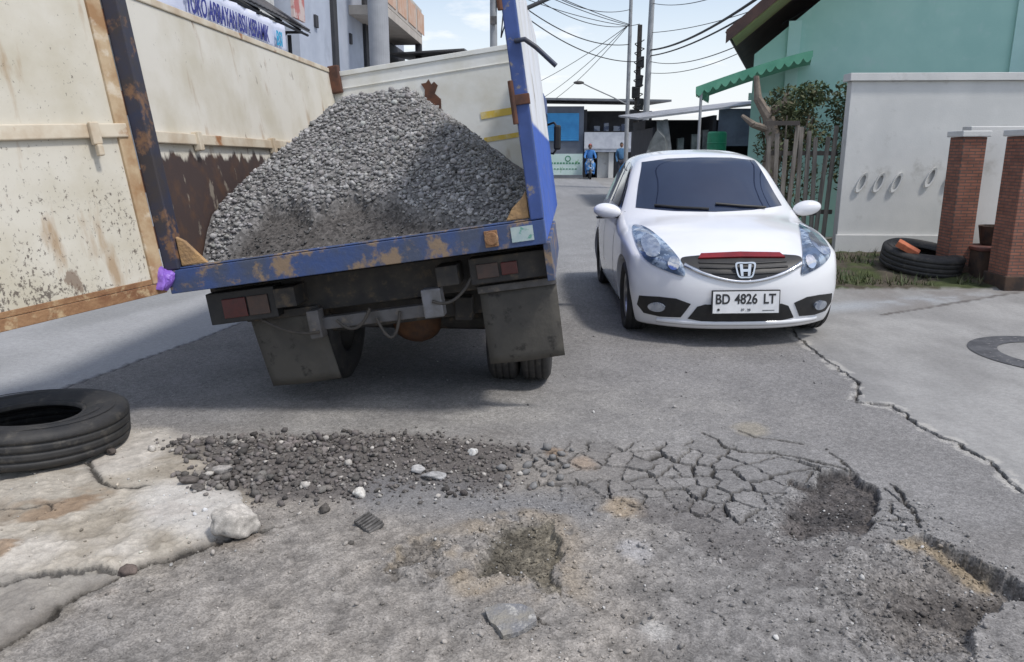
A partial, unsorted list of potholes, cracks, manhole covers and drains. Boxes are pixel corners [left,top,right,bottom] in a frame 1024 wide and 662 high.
crack [85,460,151,490]
pothole [758,468,884,549]
pothole [811,531,1024,662]
pothole [463,511,566,599]
crack [515,326,1024,533]
